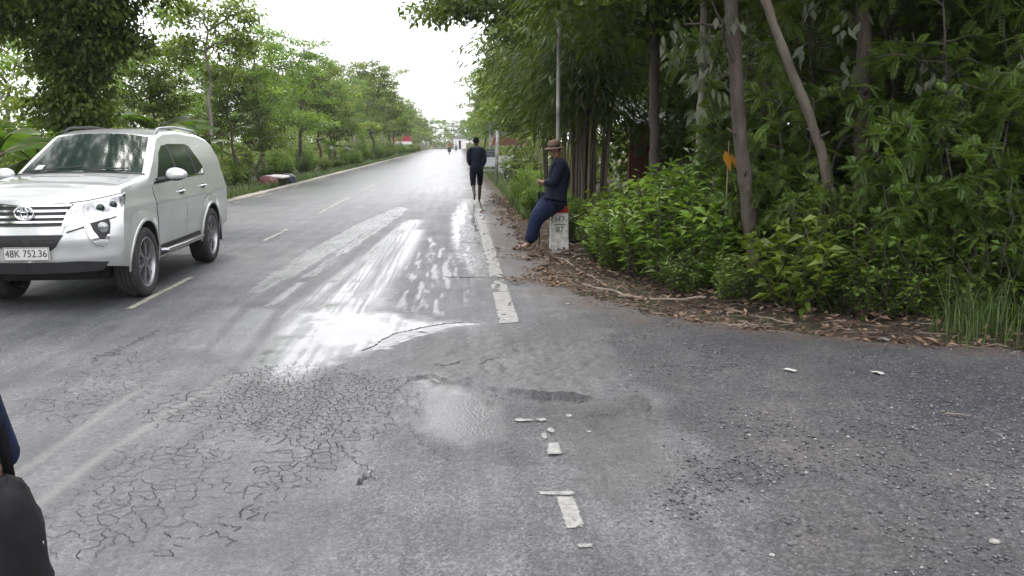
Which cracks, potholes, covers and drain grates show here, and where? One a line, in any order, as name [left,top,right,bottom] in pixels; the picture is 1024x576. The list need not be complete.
crack [16,330,425,546]
pothole [399,373,661,473]
